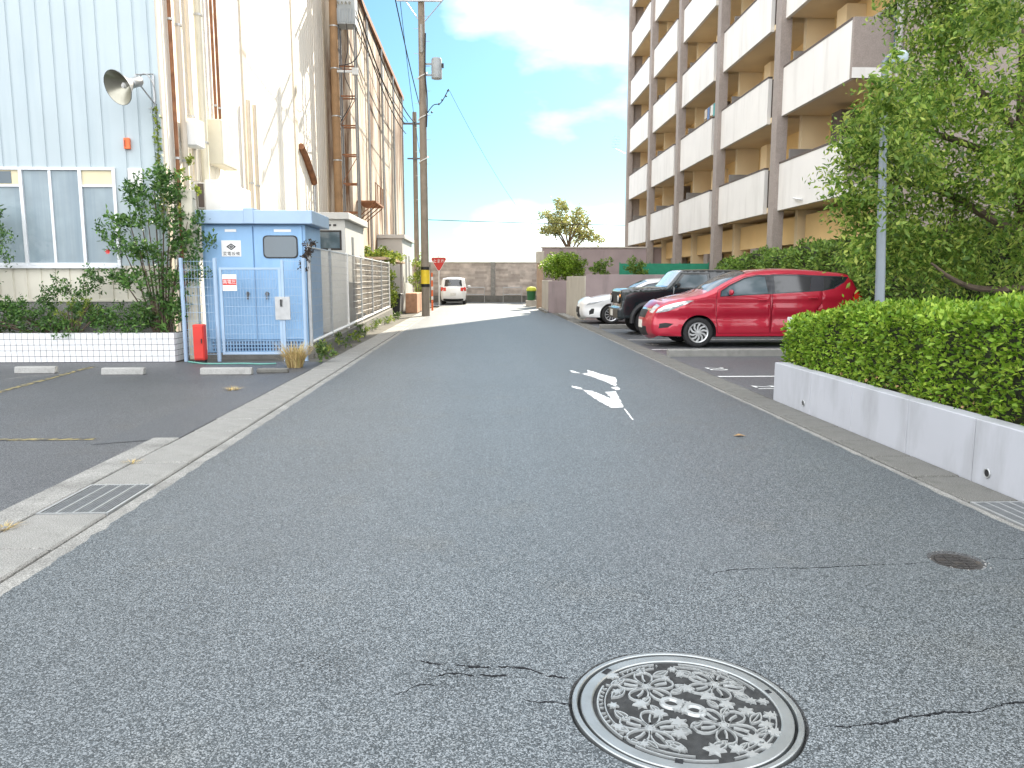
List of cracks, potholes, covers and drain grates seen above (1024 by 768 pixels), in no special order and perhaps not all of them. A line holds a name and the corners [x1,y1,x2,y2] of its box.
crack [521,698,571,707]
crack [395,661,568,695]
drain grate [35,484,155,517]
crack [713,562,925,575]
manhole cover [568,652,810,768]
manhole cover [926,550,987,570]
drain grate [970,501,1024,528]
crack [819,701,1024,728]
